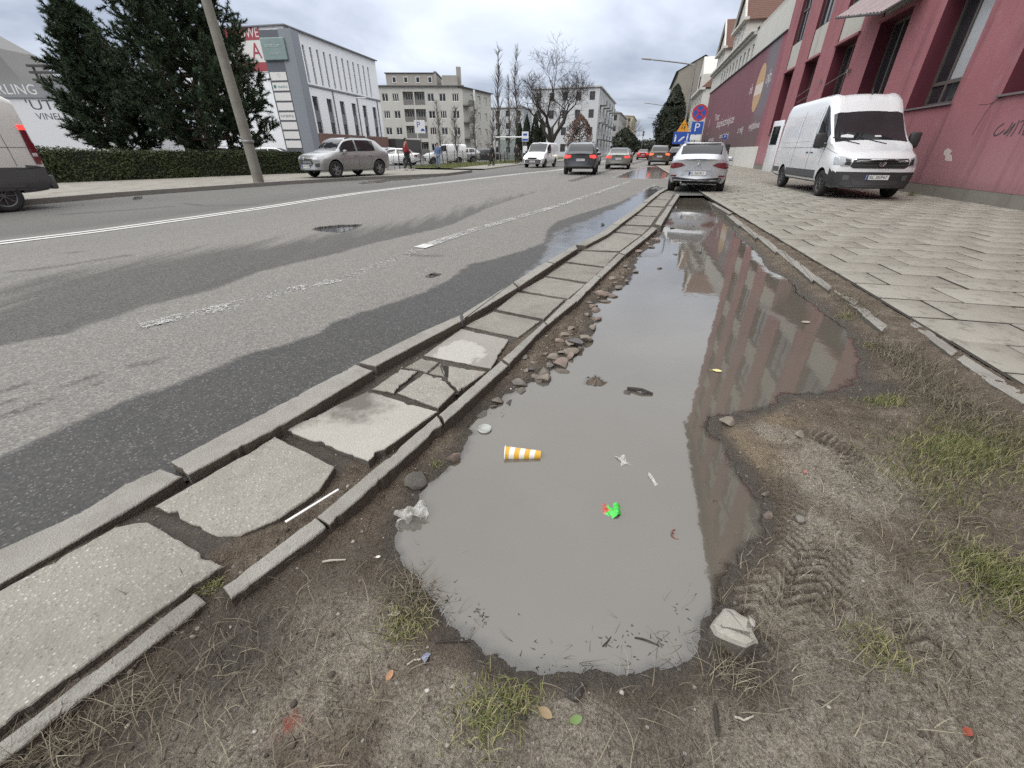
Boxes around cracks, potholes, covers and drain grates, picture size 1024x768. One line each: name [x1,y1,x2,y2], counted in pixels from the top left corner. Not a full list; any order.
crack [399,362,459,395]
pothole [311,224,362,233]
